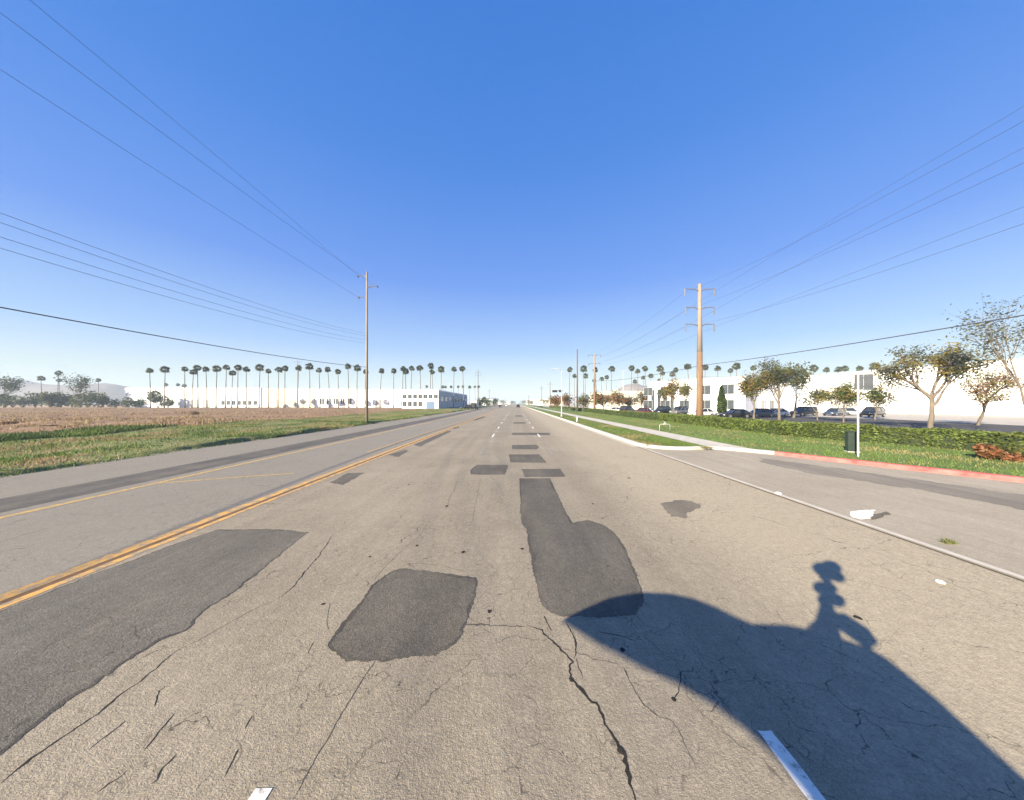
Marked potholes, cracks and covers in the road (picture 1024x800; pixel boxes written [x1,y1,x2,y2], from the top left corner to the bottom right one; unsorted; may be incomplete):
crack [186,539,330,646]
crack [0,649,179,784]
crack [465,616,698,800]
crack [295,660,376,796]
